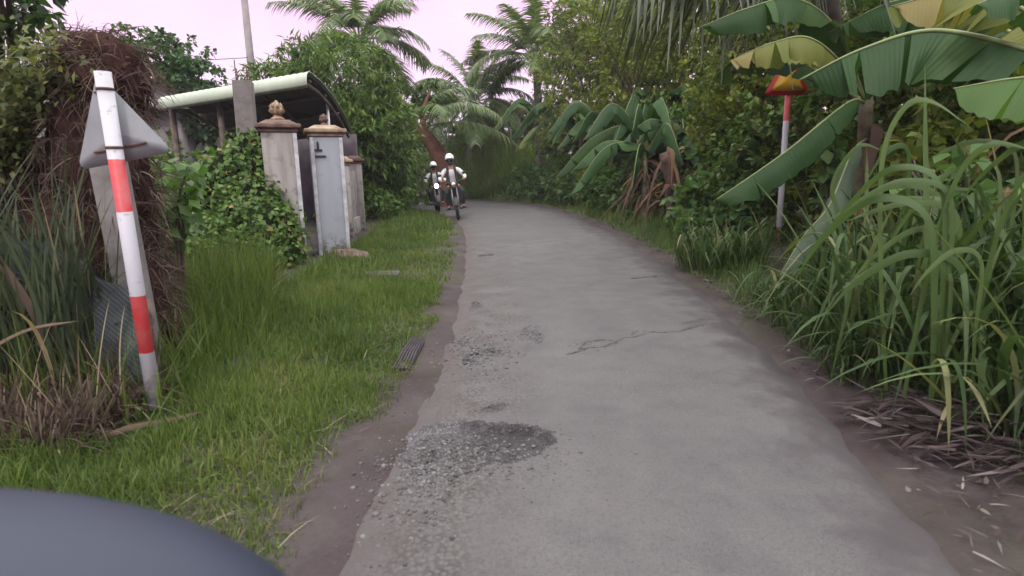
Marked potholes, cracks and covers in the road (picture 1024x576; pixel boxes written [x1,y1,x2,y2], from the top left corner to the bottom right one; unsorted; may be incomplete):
pothole [517,325,546,344]
pothole [479,403,509,412]
pothole [468,300,485,311]
crack [565,318,725,355]
pothole [395,420,558,480]
pothole [461,347,501,367]
